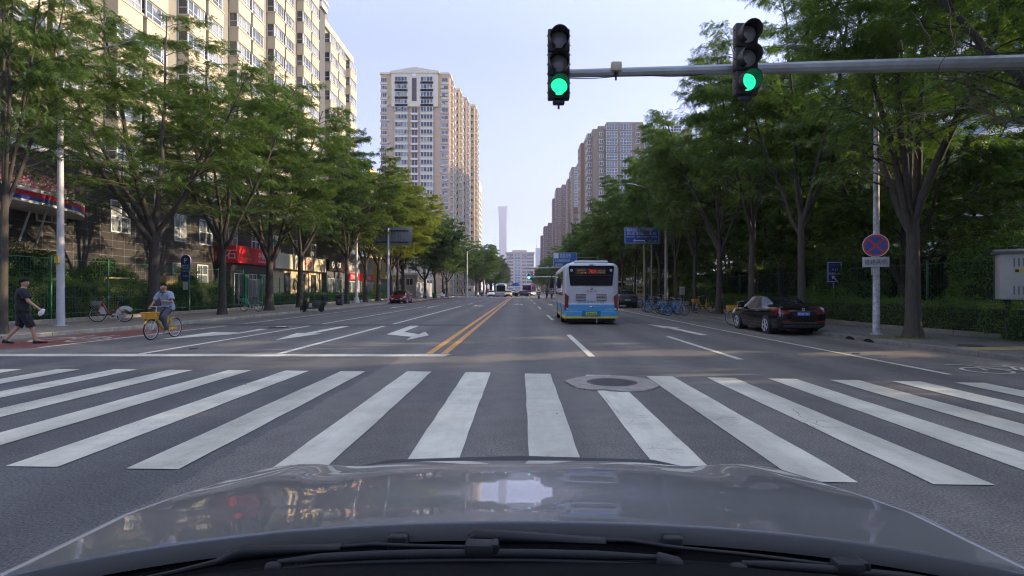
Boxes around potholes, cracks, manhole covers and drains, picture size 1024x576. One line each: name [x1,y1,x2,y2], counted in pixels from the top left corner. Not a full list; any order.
manhole cover [565,375,659,393]
